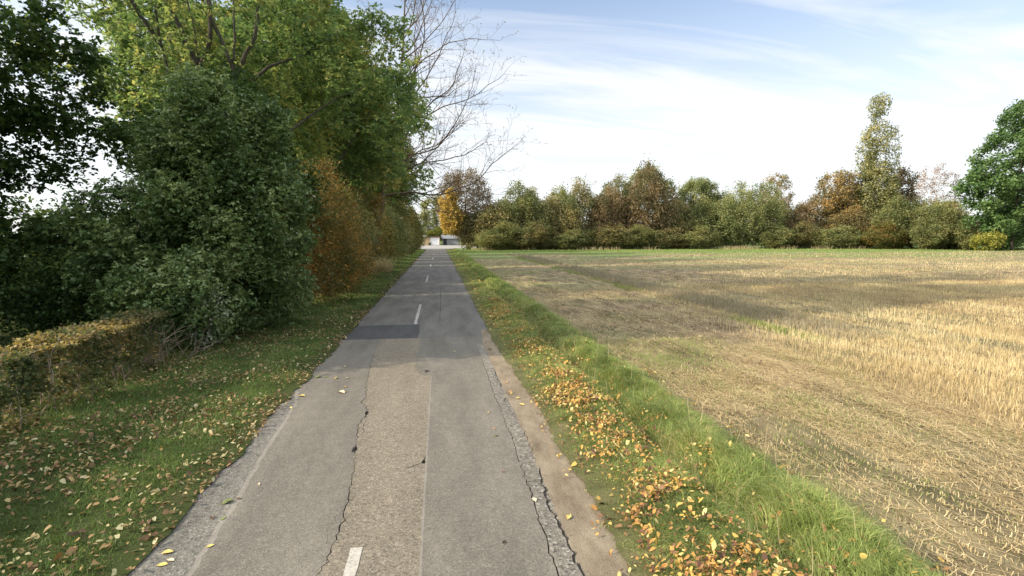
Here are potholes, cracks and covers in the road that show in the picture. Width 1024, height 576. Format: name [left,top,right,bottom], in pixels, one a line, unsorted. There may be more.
crack [481,355,586,576]
crack [316,355,374,576]
